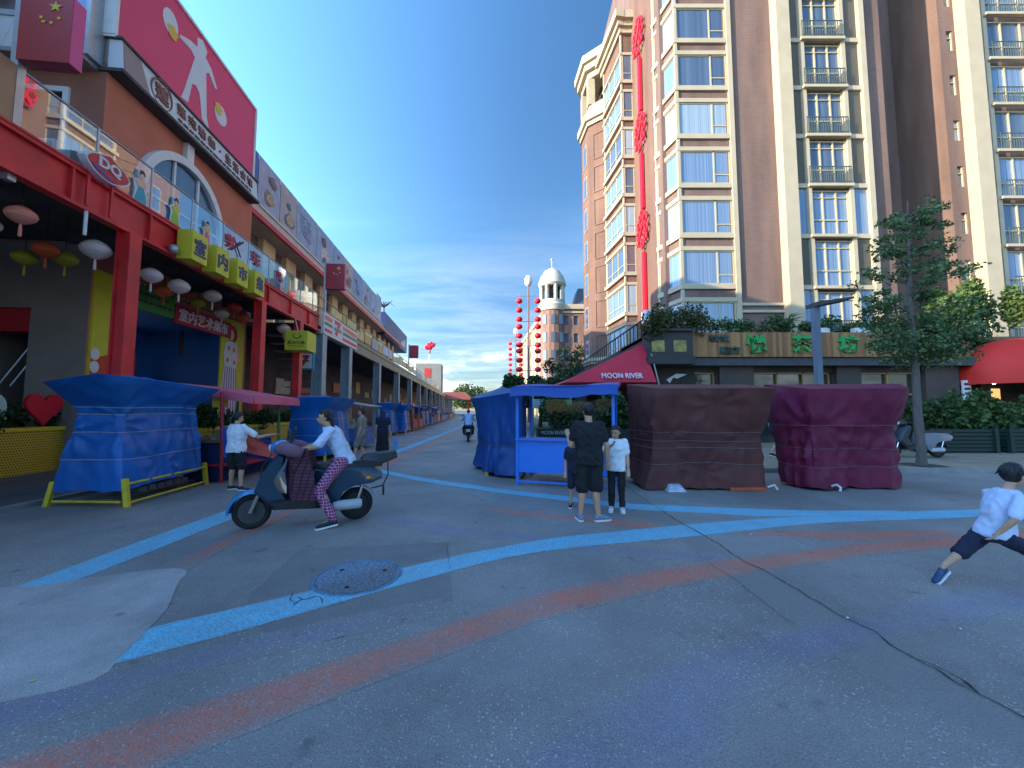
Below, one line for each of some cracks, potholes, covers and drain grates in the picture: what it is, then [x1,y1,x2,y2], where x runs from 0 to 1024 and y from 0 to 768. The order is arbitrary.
manhole cover [309,559,403,597]
crack [627,486,1024,717]
